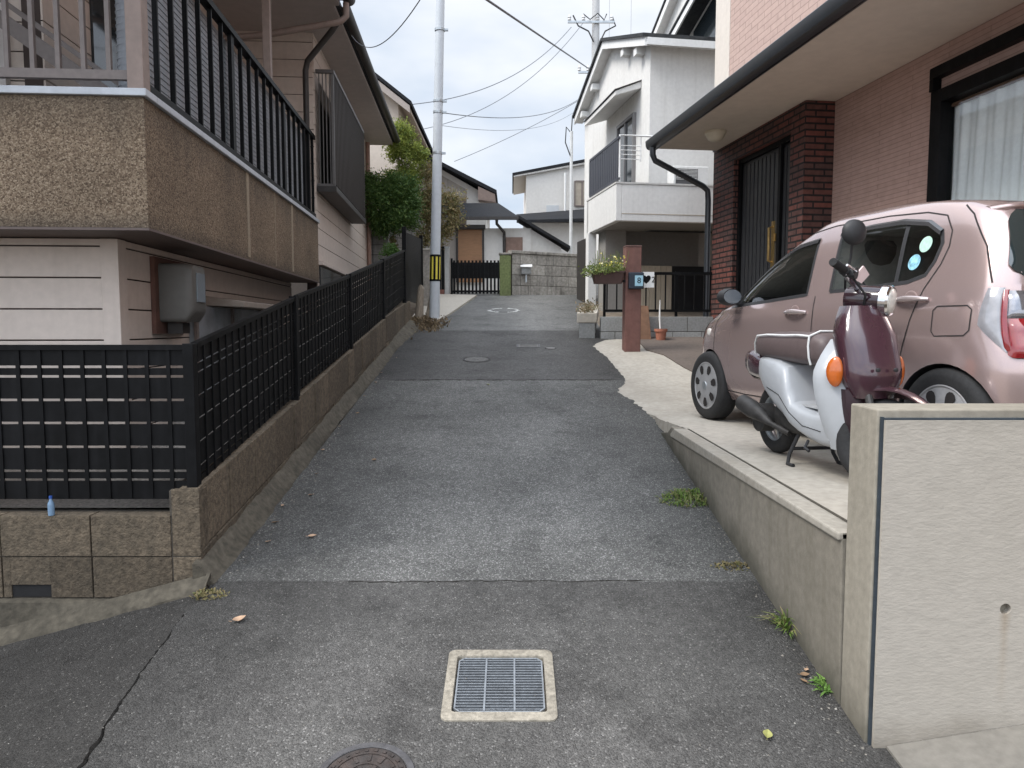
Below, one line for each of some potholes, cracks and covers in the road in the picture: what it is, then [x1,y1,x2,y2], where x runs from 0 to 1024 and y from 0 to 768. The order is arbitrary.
crack [77,614,184,768]
drain grate [441,650,558,722]
manhole cover [320,742,415,768]
